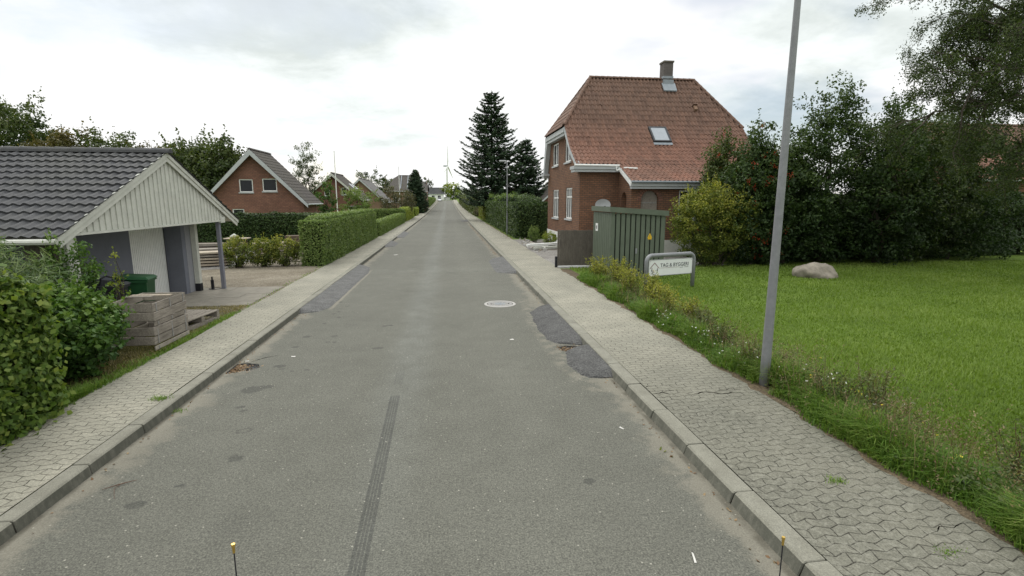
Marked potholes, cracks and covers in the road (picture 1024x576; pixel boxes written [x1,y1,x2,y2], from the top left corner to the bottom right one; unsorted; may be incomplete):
pothole [227,363,260,373]
